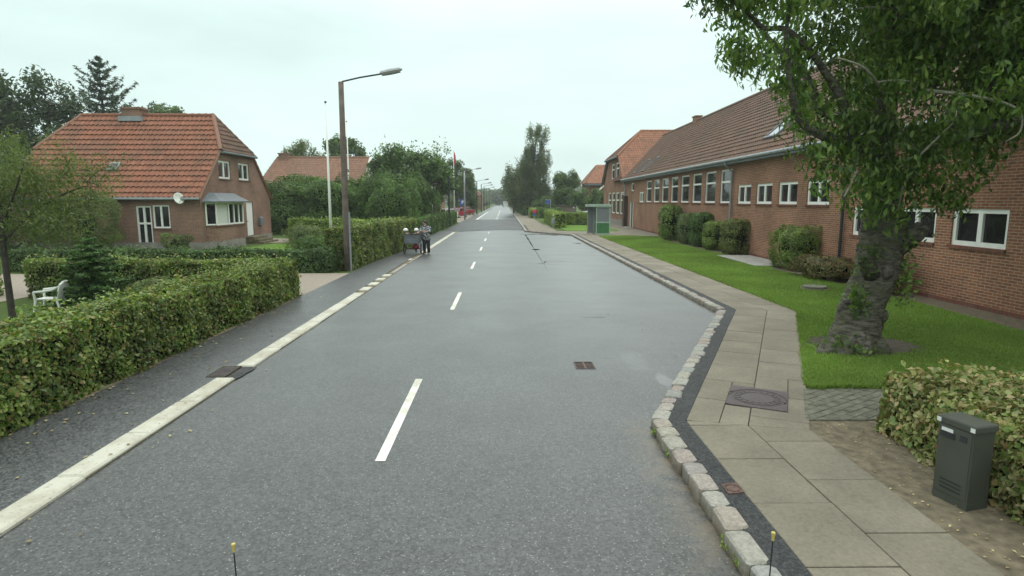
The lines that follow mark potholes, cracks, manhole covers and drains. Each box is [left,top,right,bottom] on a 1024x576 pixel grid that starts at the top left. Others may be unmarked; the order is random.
manhole cover [725,385,788,413]
drain grate [206,366,256,379]
utility cover [721,482,744,495]
